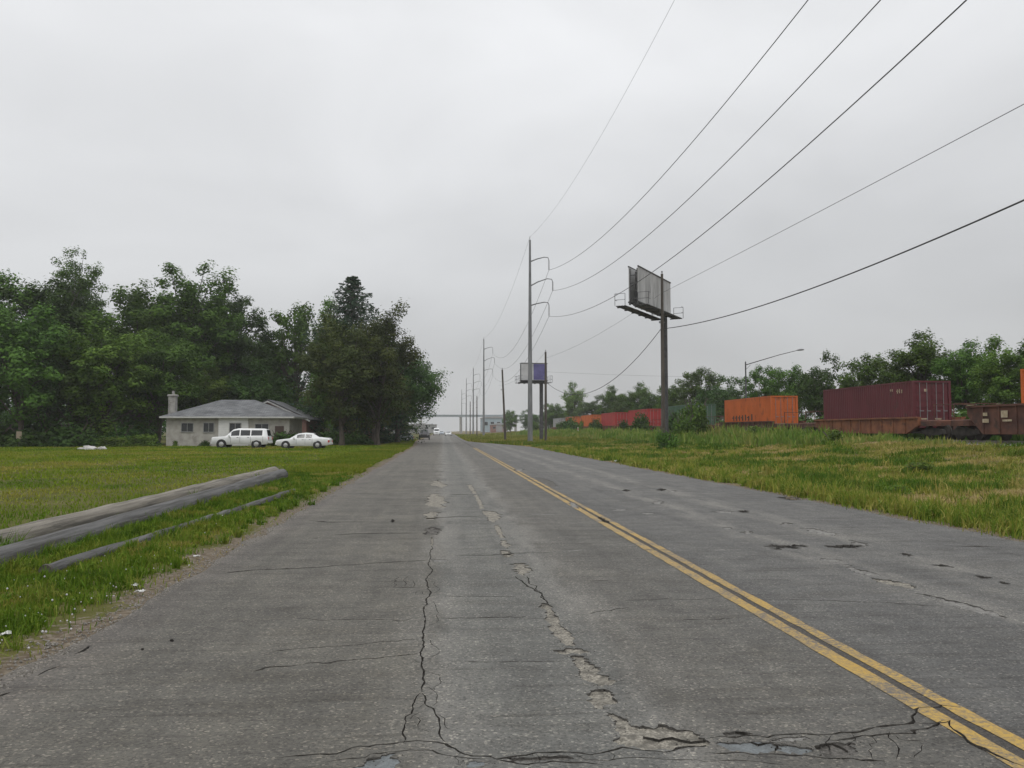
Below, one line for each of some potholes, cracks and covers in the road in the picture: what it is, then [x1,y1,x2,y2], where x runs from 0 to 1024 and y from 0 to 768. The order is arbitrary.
crack [223,546,1010,765]
pothole [354,751,408,768]
